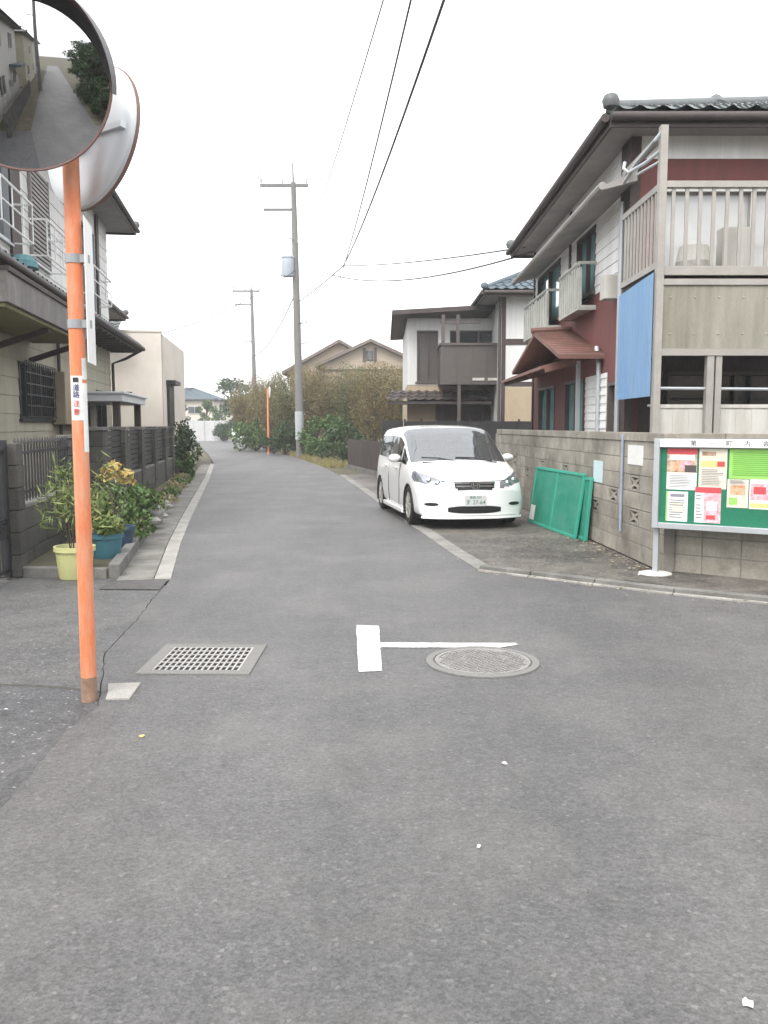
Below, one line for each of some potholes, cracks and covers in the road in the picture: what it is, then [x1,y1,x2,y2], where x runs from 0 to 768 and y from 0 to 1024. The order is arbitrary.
manhole cover [426,646,540,678]
drain grate [135,644,267,675]
